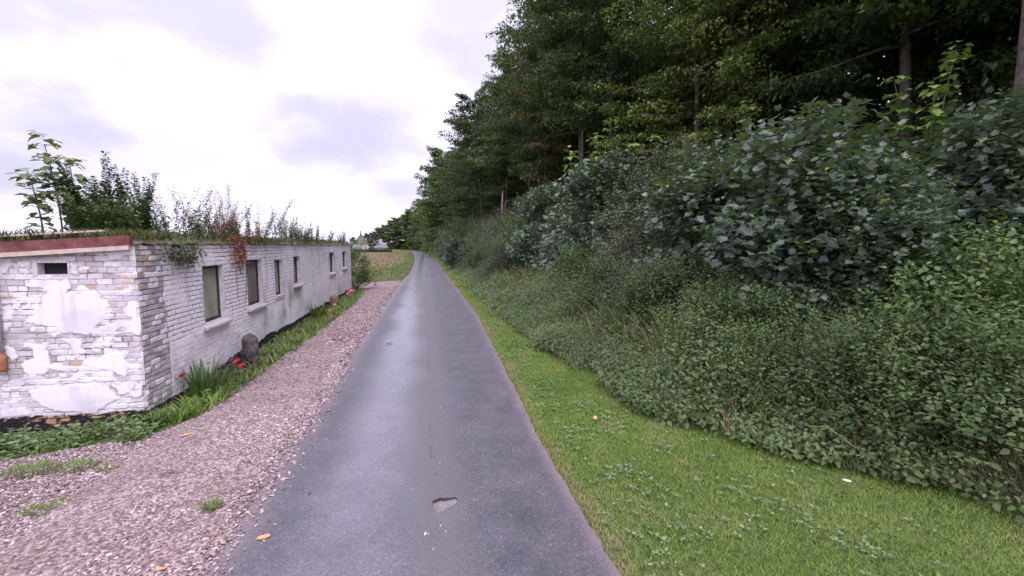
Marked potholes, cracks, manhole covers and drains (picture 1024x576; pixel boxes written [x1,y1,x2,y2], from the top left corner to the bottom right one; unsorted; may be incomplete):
pothole [432,497,458,512]
